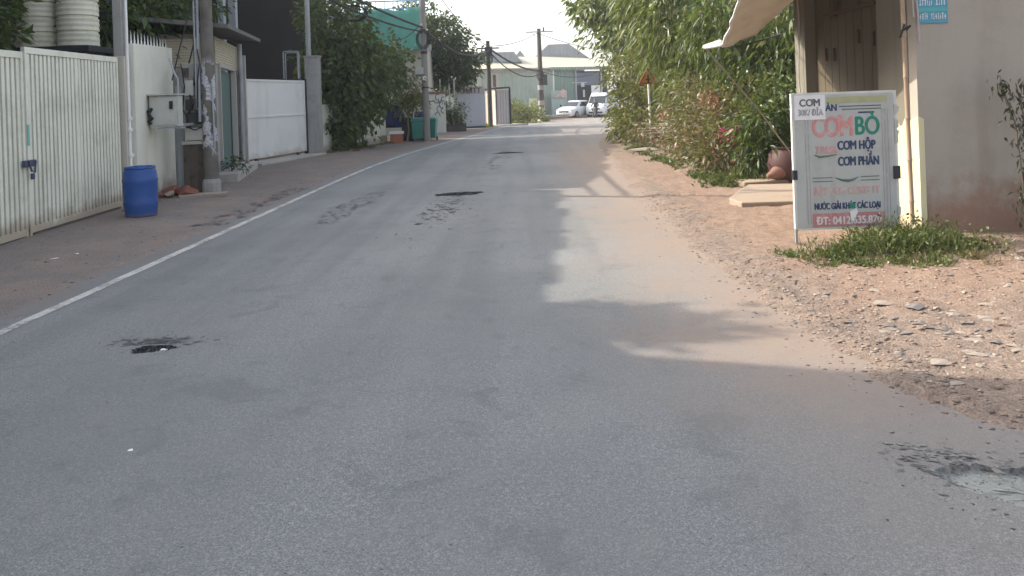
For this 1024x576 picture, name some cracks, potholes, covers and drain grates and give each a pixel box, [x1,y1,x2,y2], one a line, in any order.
pothole [130,345,178,354]
pothole [935,463,1024,507]
